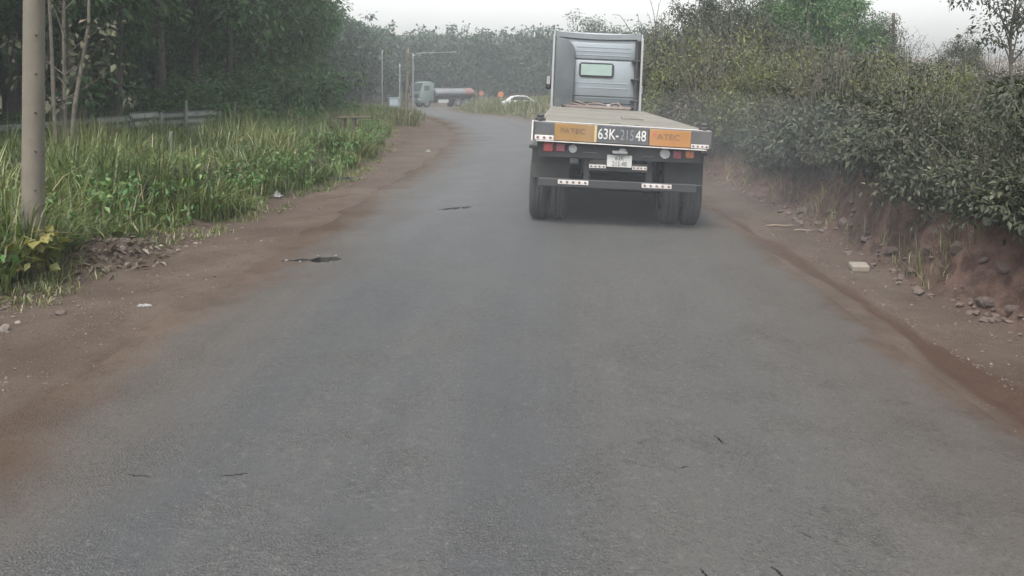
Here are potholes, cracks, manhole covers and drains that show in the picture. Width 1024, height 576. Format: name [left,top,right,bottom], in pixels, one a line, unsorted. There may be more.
pothole [282,255,341,263]
